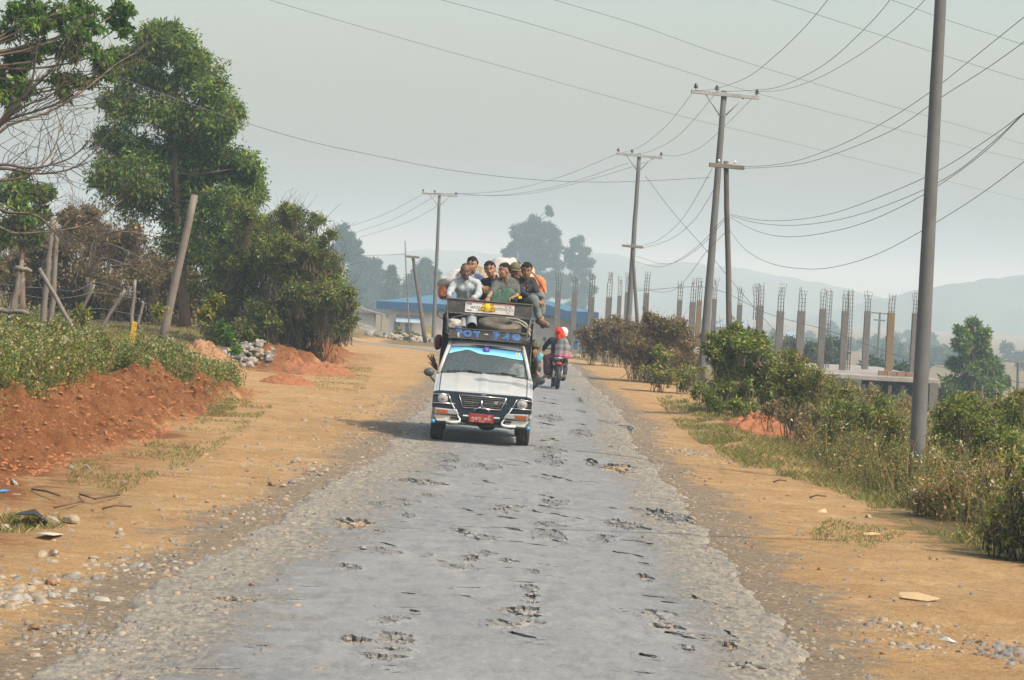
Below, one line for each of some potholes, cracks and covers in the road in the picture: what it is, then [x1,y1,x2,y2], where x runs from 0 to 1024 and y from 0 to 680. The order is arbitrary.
pothole [369,630,425,647]
pothole [348,651,420,663]
pothole [361,644,422,654]
pothole [628,506,696,526]
pothole [327,634,384,645]
pothole [487,605,552,621]
pothole [450,533,511,542]
pothole [515,592,542,604]
pothole [593,518,656,532]
pothole [594,463,639,475]
pothole [444,527,478,537]
pothole [536,498,574,507]
